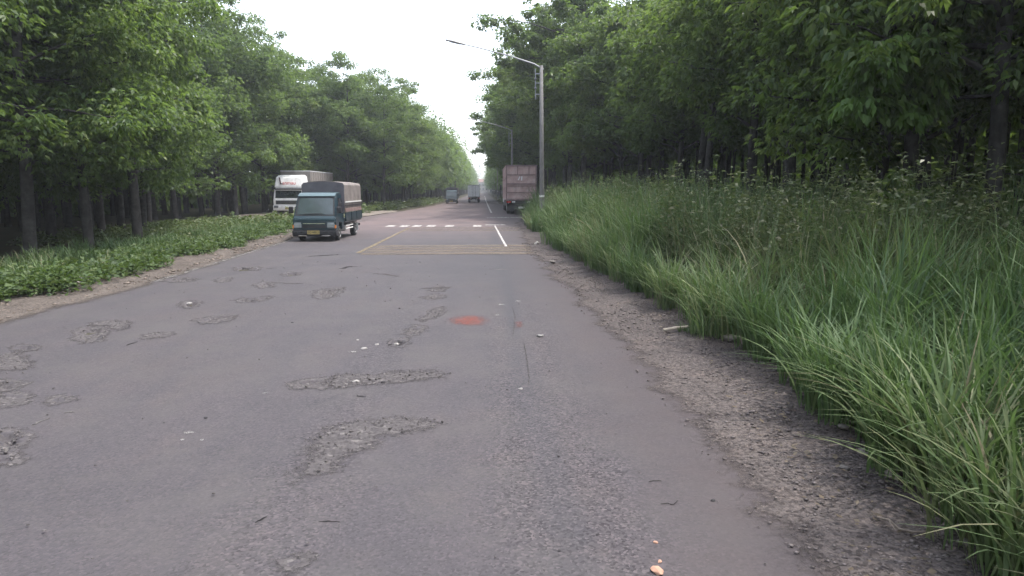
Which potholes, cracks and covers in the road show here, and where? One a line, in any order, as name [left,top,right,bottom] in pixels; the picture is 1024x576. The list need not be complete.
pothole [0,391,37,408]
pothole [287,415,443,485]
pothole [178,300,203,309]
pothole [190,314,240,325]
pothole [325,369,452,389]
pothole [0,351,36,371]
pothole [67,325,110,345]
pothole [398,324,428,336]
pothole [283,377,331,391]
pothole [415,306,446,322]
pothole [0,427,38,468]
pothole [90,320,132,331]
